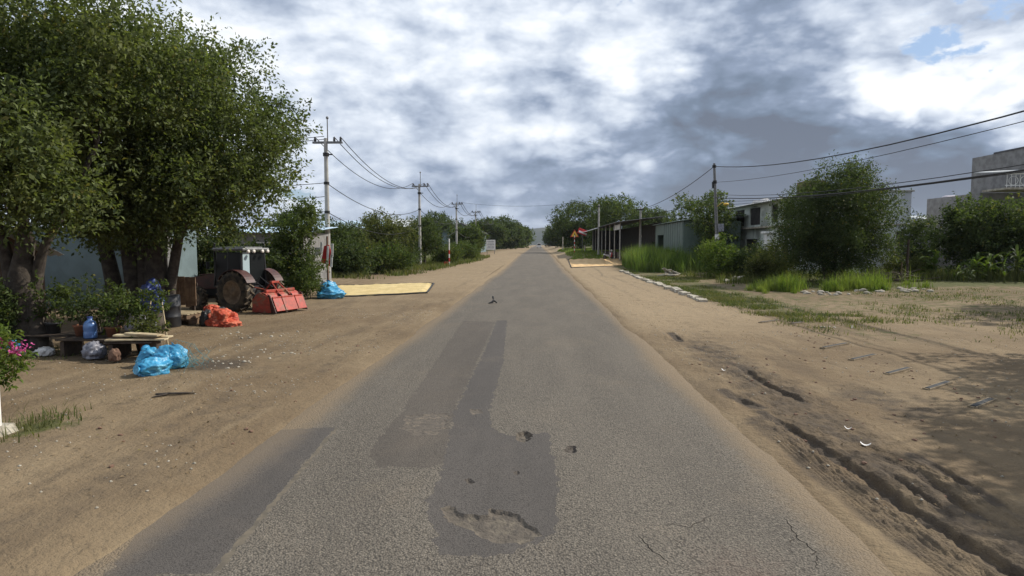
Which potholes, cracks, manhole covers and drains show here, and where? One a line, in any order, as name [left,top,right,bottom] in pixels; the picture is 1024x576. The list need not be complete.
pothole [399,413,451,436]
pothole [516,431,533,443]
pothole [440,506,542,545]
crack [785,519,818,569]
crack [638,513,716,567]
